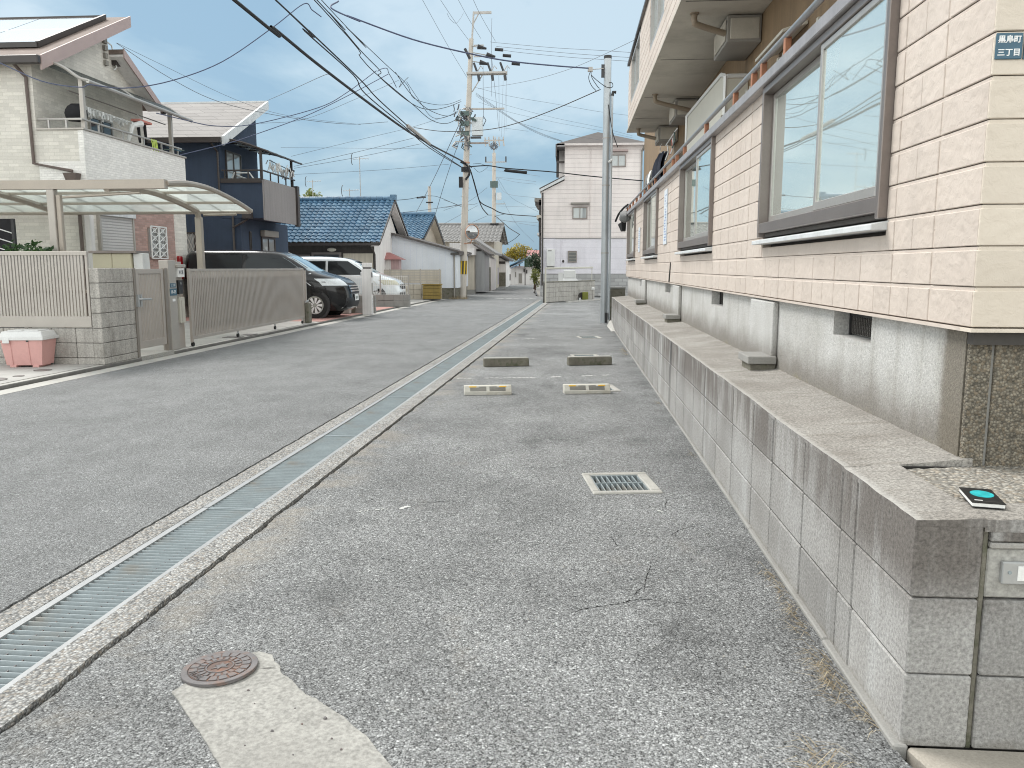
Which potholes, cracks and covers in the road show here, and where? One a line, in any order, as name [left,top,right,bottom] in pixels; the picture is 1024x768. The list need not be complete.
drain grate [0,507,256,693]
drain grate [581,472,663,495]
crack [572,566,683,613]
manhole cover [181,650,258,687]
